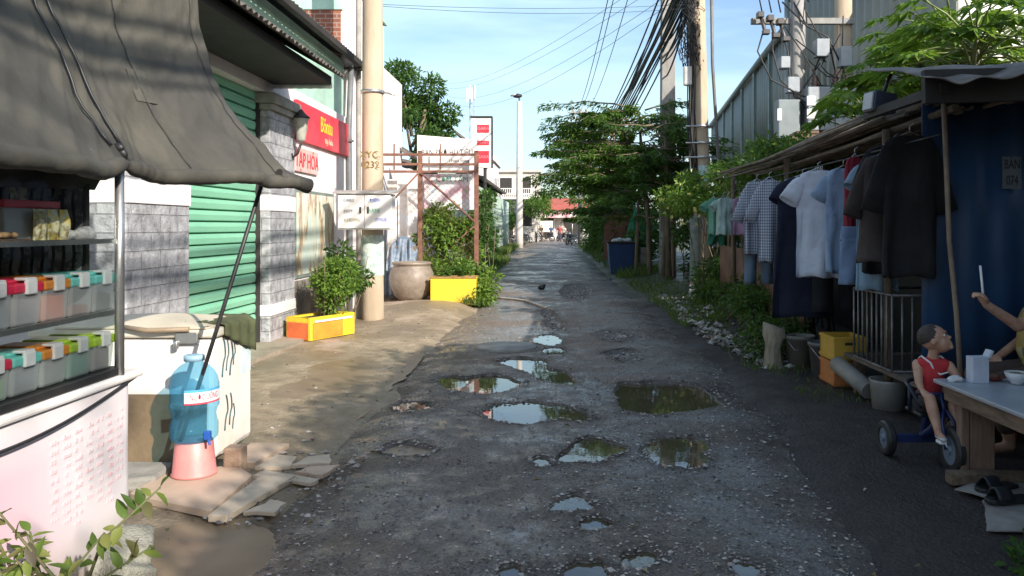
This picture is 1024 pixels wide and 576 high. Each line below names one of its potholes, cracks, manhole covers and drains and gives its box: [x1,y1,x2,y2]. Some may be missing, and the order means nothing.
pothole [636,430,714,470]
pothole [549,433,631,464]
pothole [544,490,598,512]
pothole [528,453,556,468]
pothole [389,398,438,413]
pothole [473,398,600,425]
pothole [609,378,726,416]
pothole [594,327,648,343]
pothole [576,512,614,531]
pothole [531,332,566,346]
pothole [601,348,643,363]
pothole [429,373,530,395]
